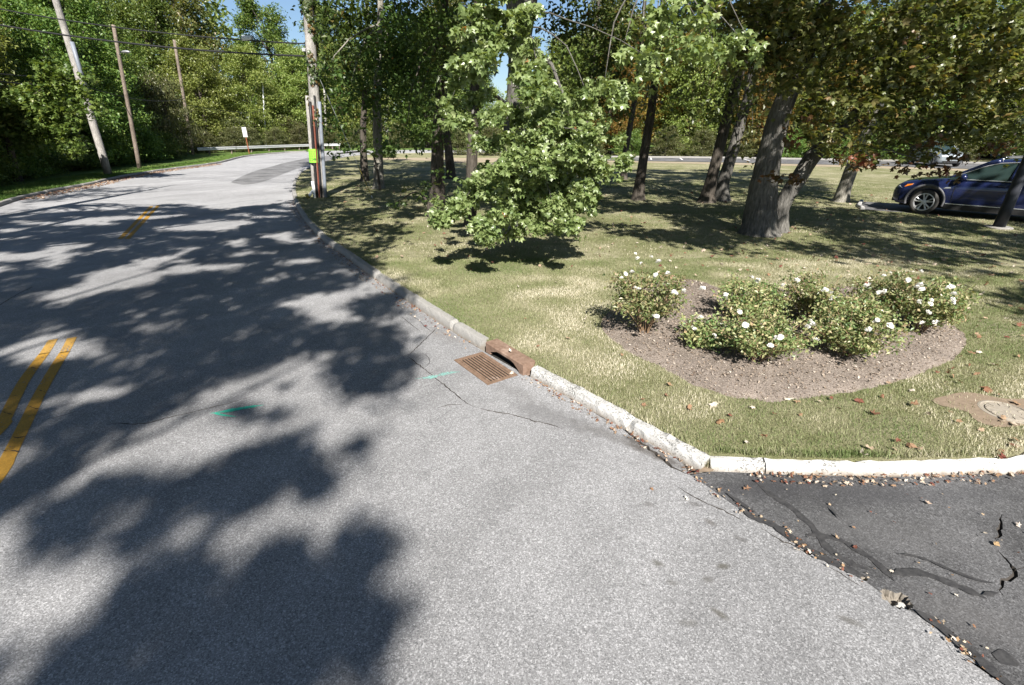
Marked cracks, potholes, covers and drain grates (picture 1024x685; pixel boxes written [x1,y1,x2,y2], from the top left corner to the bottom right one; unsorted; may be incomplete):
crack [113,398,245,425]
drain grate [454,339,535,385]
crack [995,516,1024,596]
manhole cover [977,400,1024,424]
